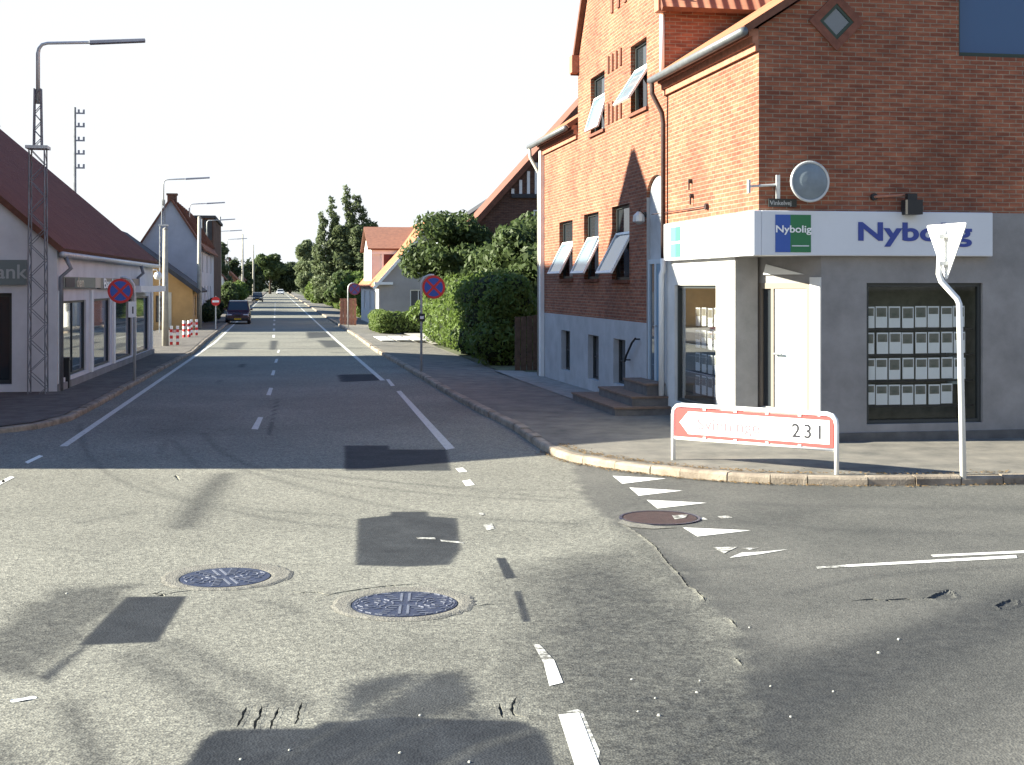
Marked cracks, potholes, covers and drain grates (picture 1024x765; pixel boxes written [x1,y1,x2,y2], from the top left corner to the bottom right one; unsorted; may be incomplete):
pothole [992,599,1023,611]
manhole cover [617,510,701,529]
manhole cover [330,587,477,621]
pothole [924,589,961,602]
crack [492,696,534,721]
manhole cover [161,562,294,591]
crack [228,701,309,732]
